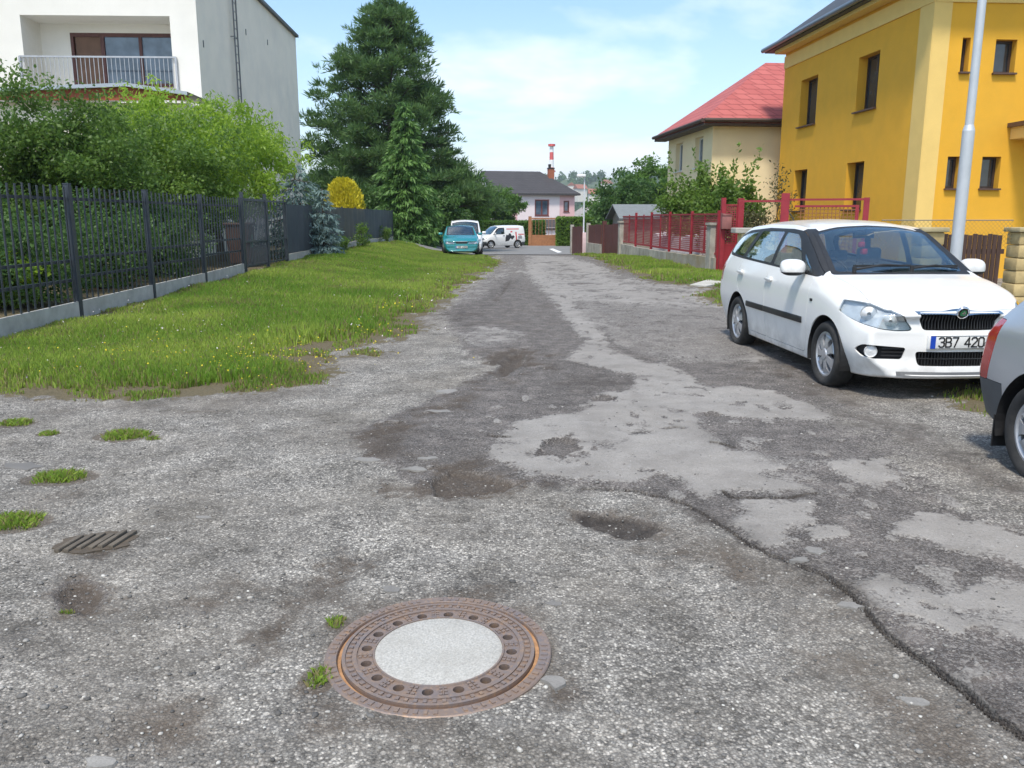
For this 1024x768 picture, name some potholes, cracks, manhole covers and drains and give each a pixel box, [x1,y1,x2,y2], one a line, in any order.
pothole [534,436,581,461]
drain grate [52,530,139,555]
pothole [428,467,524,499]
crack [580,487,1024,742]
pothole [47,576,111,617]
manhole cover [324,597,551,719]
pothole [572,510,666,541]
